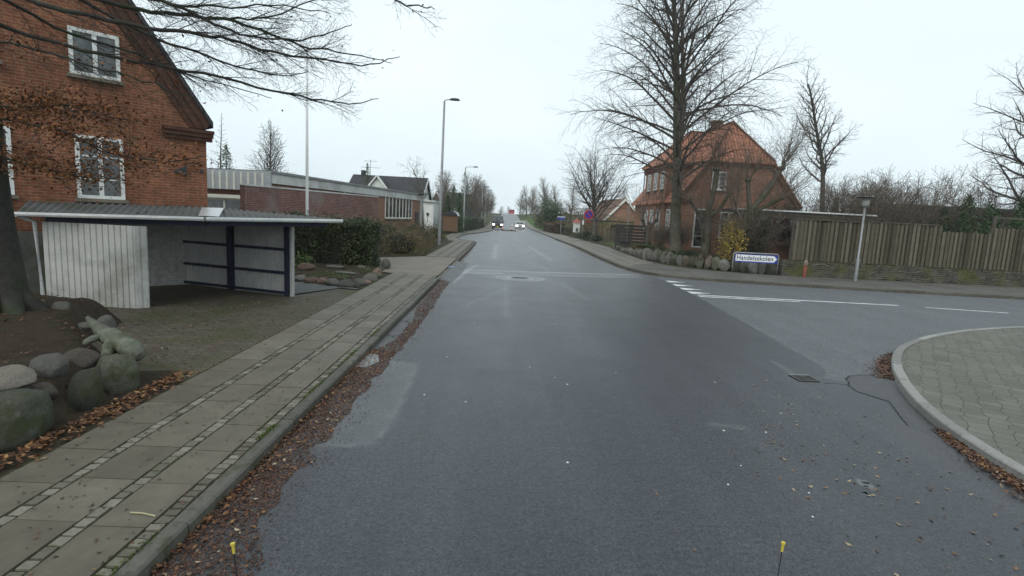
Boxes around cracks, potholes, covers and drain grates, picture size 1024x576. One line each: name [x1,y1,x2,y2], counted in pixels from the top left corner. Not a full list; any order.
pothole [839,473,893,496]
drain grate [788,374,820,382]
